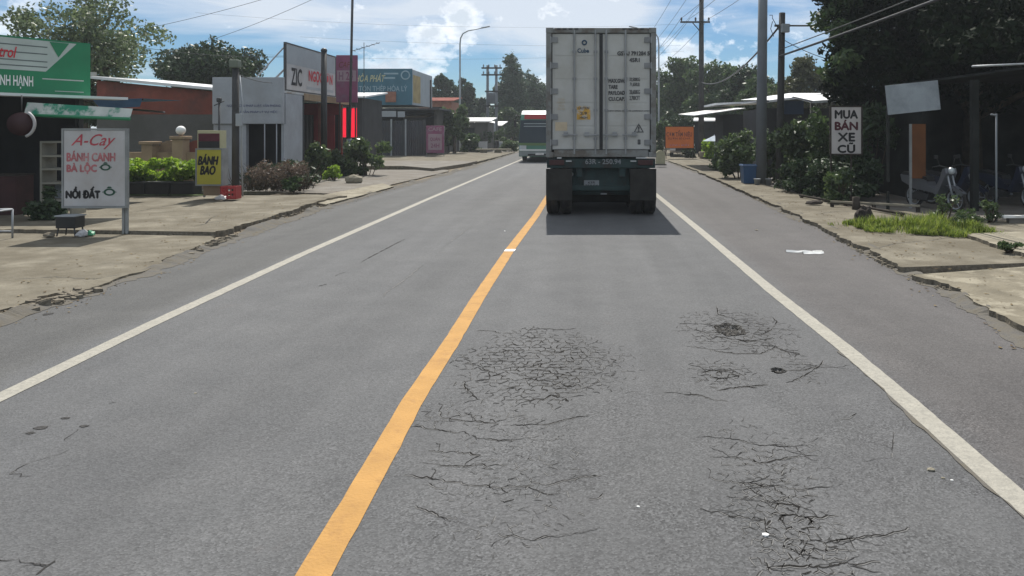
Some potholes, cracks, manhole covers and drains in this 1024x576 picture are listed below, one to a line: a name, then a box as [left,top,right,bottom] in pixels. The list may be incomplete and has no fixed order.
crack [404,326,646,559]
crack [696,418,910,576]
pothole [715,322,746,337]
crack [666,306,846,401]
